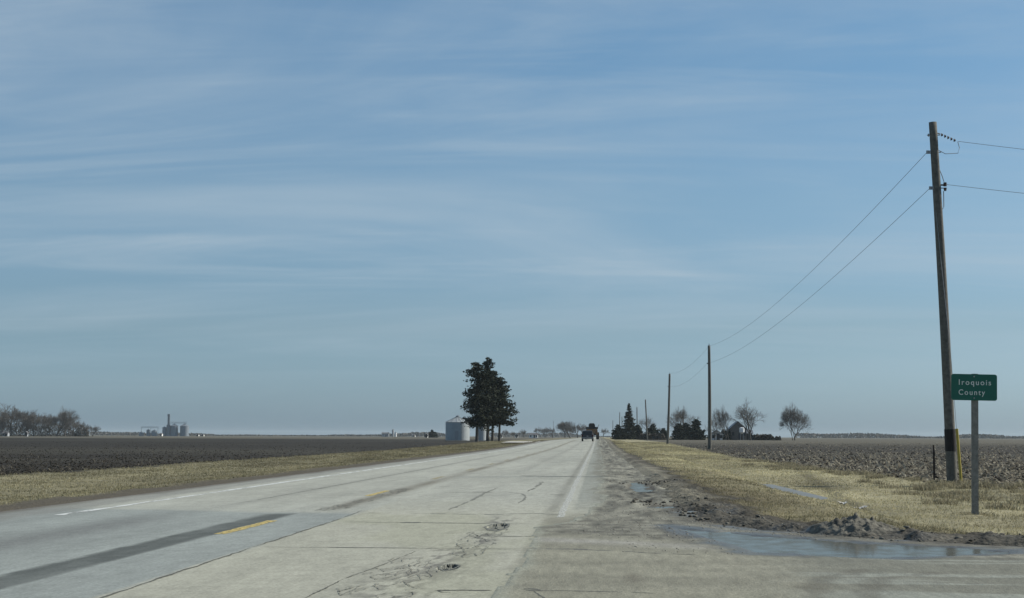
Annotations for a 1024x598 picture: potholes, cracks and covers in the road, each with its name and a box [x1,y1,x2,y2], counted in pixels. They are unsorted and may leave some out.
crack [307,527,661,598]
crack [449,476,573,510]
pothole [484,522,510,531]
